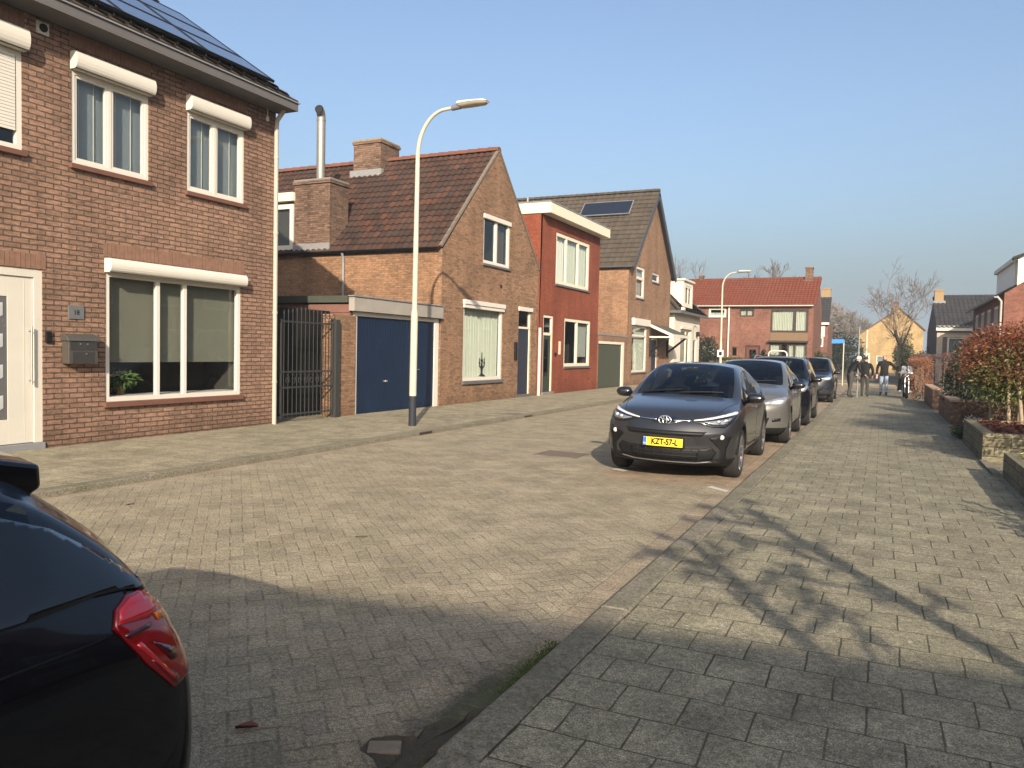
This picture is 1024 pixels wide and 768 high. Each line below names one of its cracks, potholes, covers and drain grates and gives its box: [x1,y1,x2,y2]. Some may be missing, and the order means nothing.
pothole [360,707,487,768]
